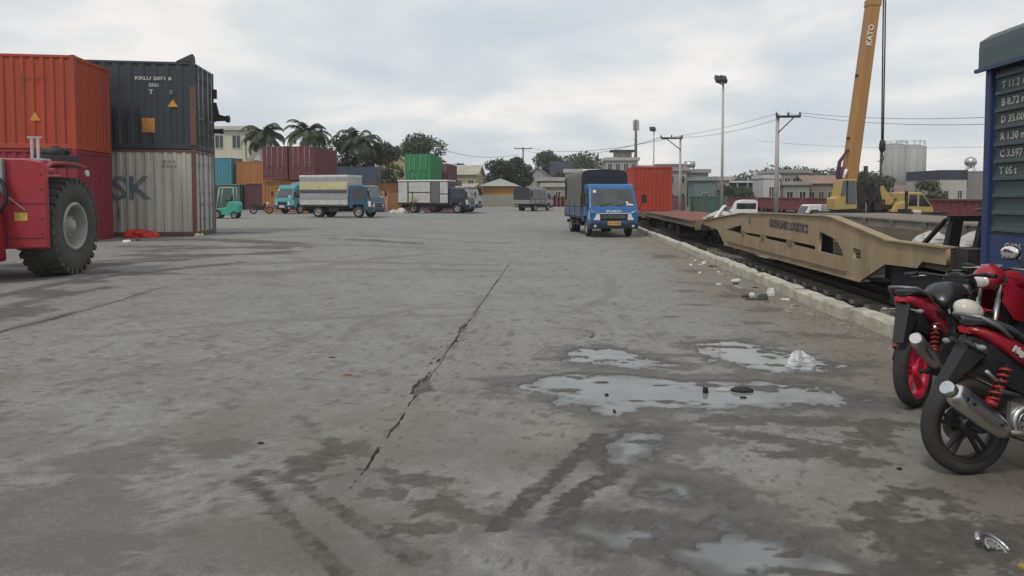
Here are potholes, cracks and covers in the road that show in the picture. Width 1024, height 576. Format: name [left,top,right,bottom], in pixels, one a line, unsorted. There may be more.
crack [349,262,511,489]
